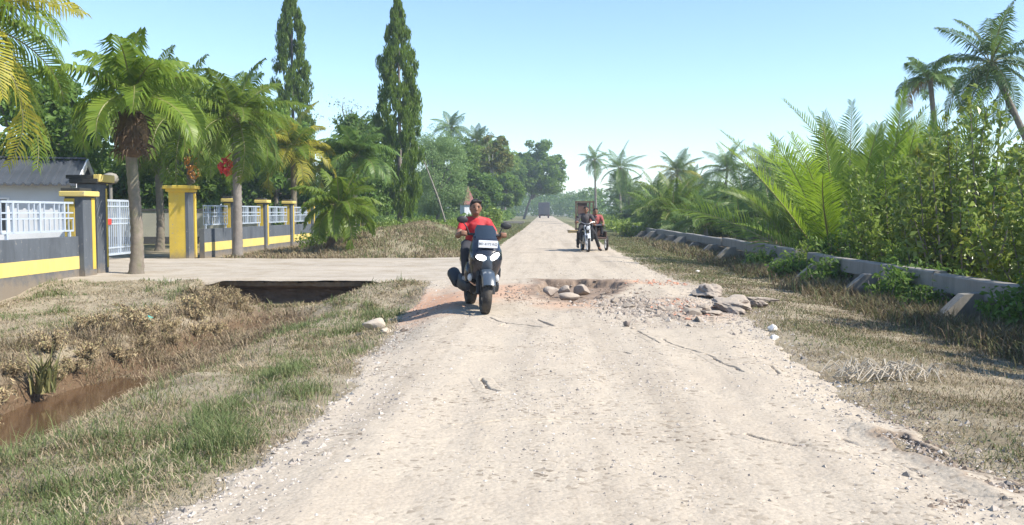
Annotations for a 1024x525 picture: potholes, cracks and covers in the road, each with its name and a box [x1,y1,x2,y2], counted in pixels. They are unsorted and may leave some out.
crack [468,376,511,394]
crack [597,330,789,376]
pothole [510,278,649,304]
crack [730,430,941,487]
crack [481,316,590,329]
